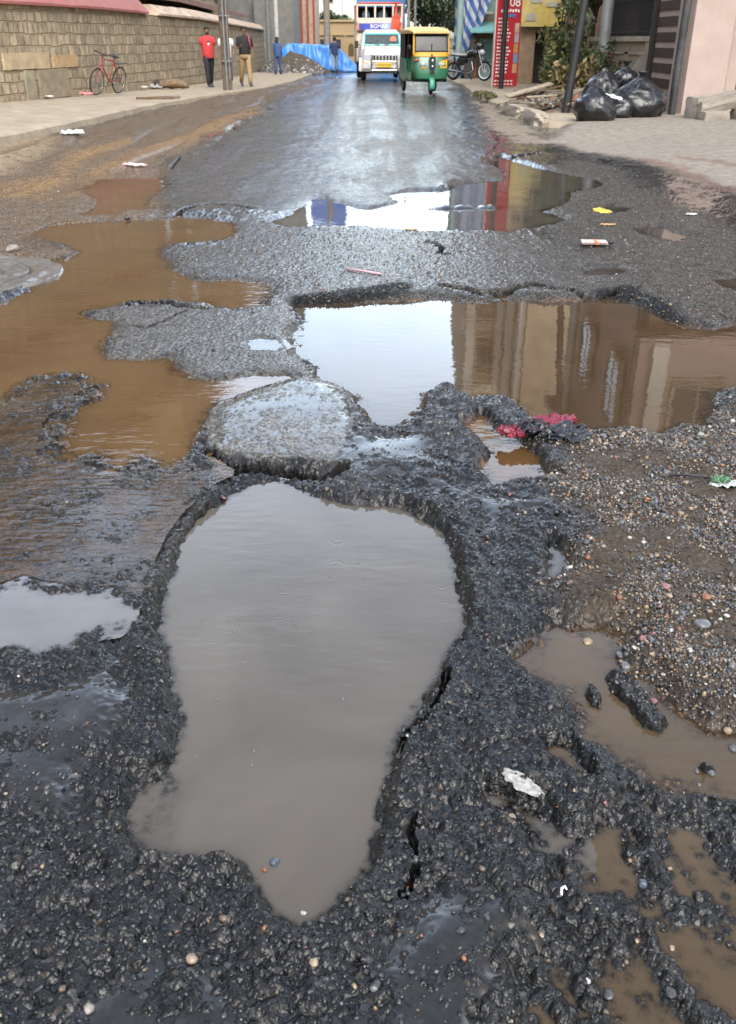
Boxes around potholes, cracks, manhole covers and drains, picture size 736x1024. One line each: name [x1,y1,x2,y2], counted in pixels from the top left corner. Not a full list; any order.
crack [125,300,209,328]
pothole [261,153,615,233]
pothole [444,400,571,484]
pothole [63,175,174,216]
pothole [0,576,149,661]
pothole [106,473,483,934]
crack [396,658,452,760]
pothole [0,212,306,476]
pothole [491,598,736,823]
pothole [279,287,736,434]
